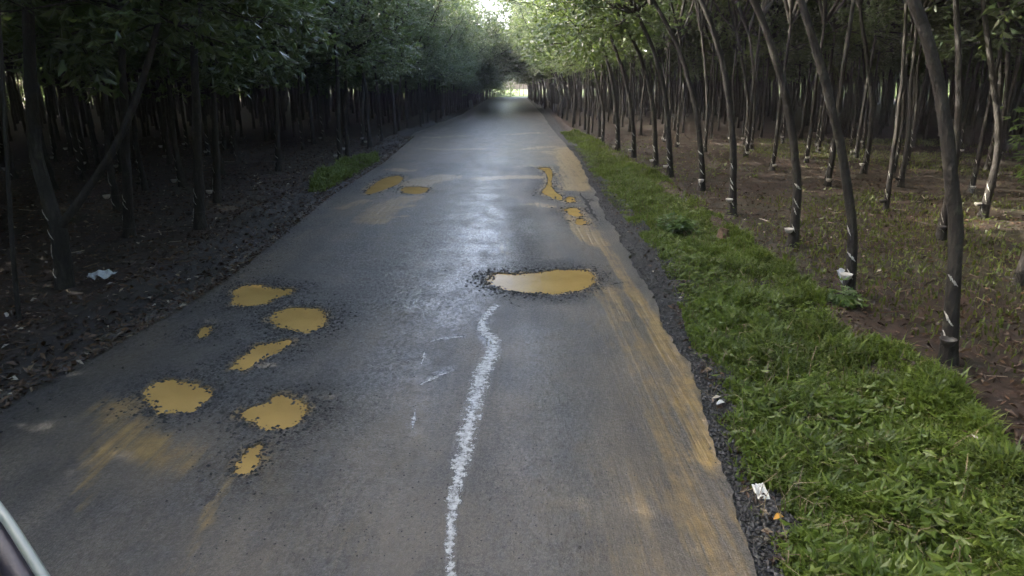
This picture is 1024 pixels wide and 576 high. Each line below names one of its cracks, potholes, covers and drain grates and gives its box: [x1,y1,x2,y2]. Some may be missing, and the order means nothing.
pothole [360,173,407,195]
pothole [531,166,573,201]
pothole [195,329,327,387]
pothole [197,275,328,316]
pothole [387,185,438,195]
pothole [207,372,353,461]
pothole [551,206,597,219]
pothole [444,261,623,307]
pothole [562,216,601,228]
pothole [228,294,360,344]
